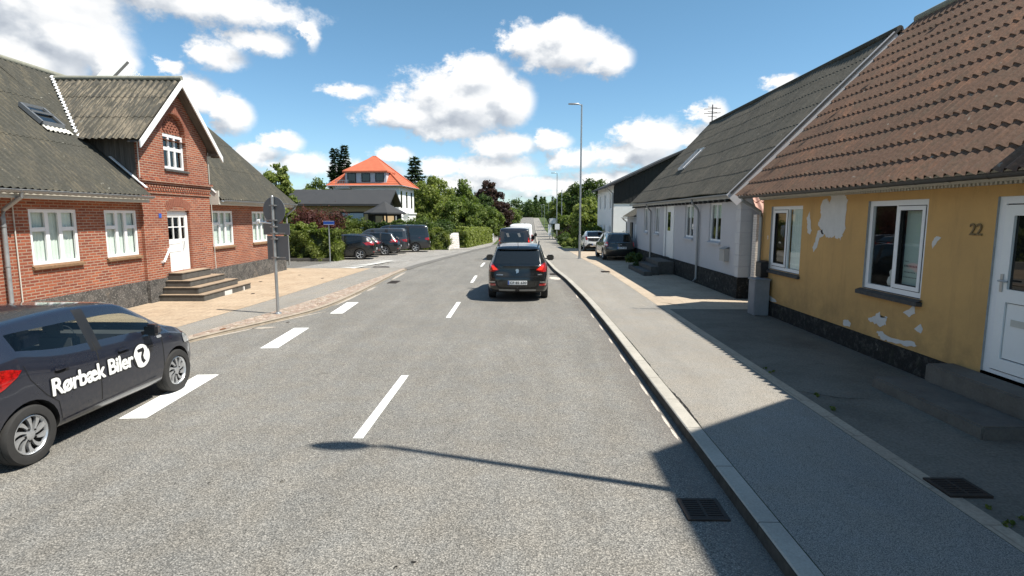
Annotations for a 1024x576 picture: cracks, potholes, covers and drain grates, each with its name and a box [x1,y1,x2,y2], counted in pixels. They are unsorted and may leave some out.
drain grate [677,498,731,522]
drain grate [923,477,994,499]
